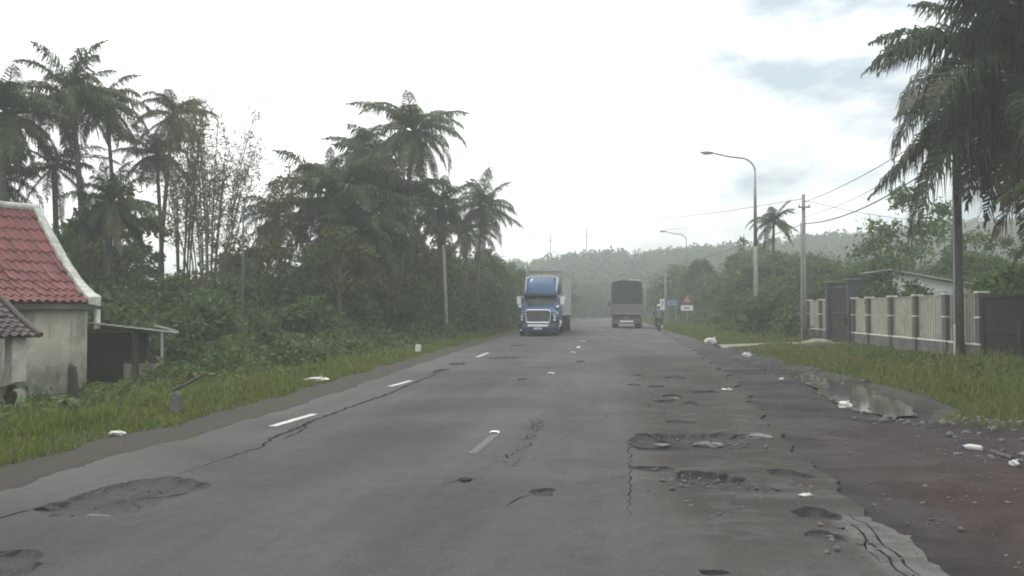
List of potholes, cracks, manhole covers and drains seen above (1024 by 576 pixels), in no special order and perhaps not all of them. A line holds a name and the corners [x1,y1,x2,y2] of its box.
crack [179,374,436,474]
pothole [790,506,842,520]
pothole [629,433,754,452]
pothole [766,469,816,480]
pothole [529,488,556,497]
pothole [0,549,44,576]
pothole [803,530,847,542]
crack [850,517,921,576]
pothole [674,470,748,484]
pothole [28,476,212,517]
